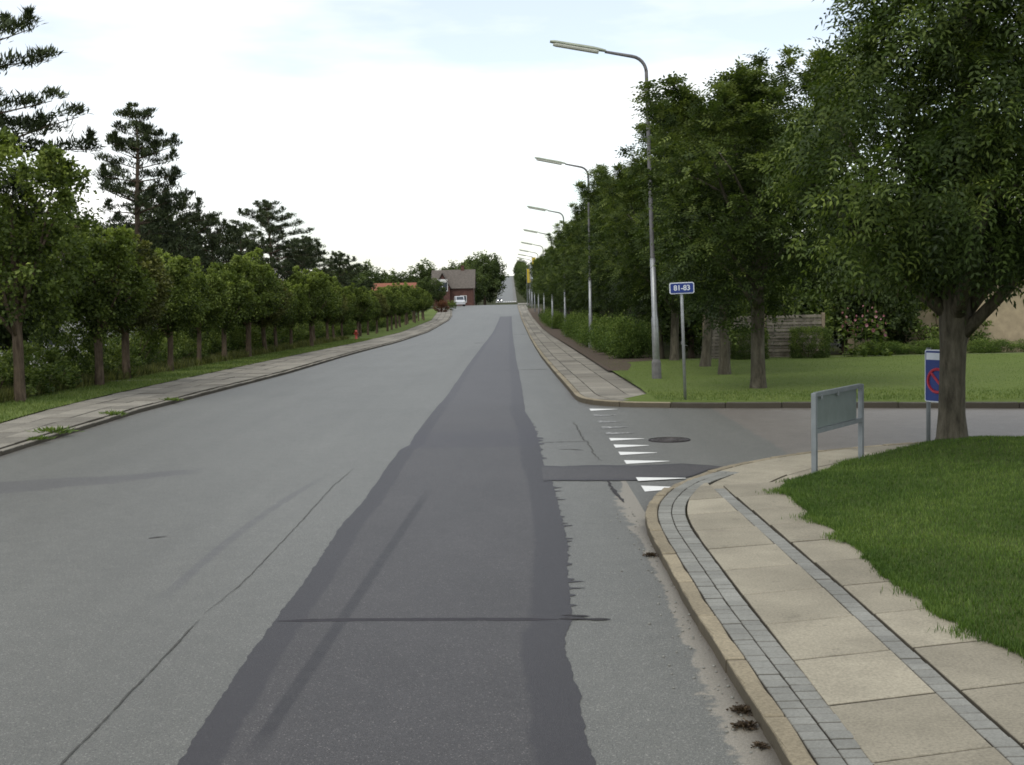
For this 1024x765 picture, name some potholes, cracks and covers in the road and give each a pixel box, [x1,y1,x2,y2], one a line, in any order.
crack [607,481,624,502]
crack [565,423,599,459]
crack [60,625,194,765]
